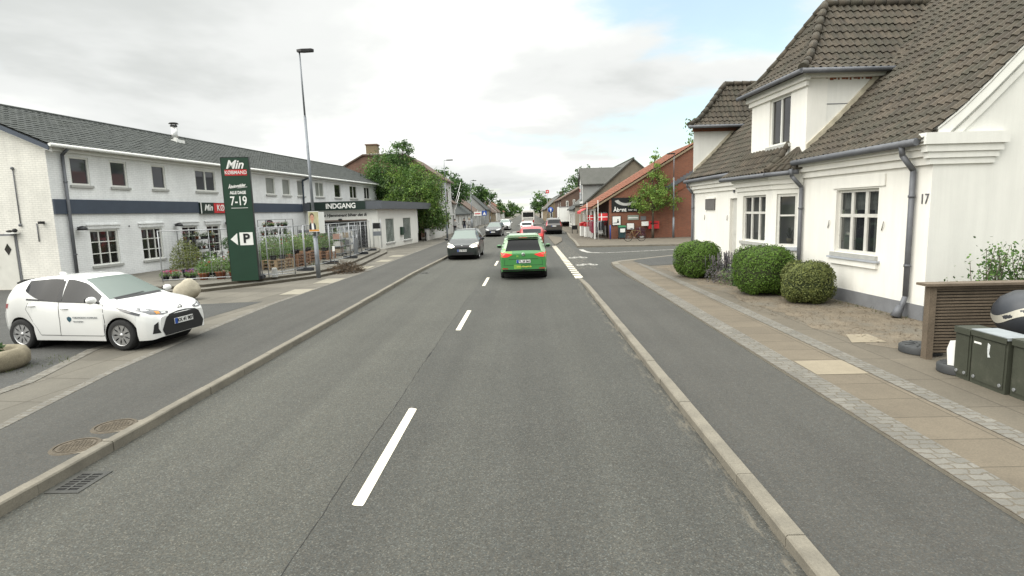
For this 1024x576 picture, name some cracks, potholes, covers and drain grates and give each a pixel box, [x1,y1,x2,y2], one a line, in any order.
manhole cover [48,437,105,456]
manhole cover [90,418,141,434]
